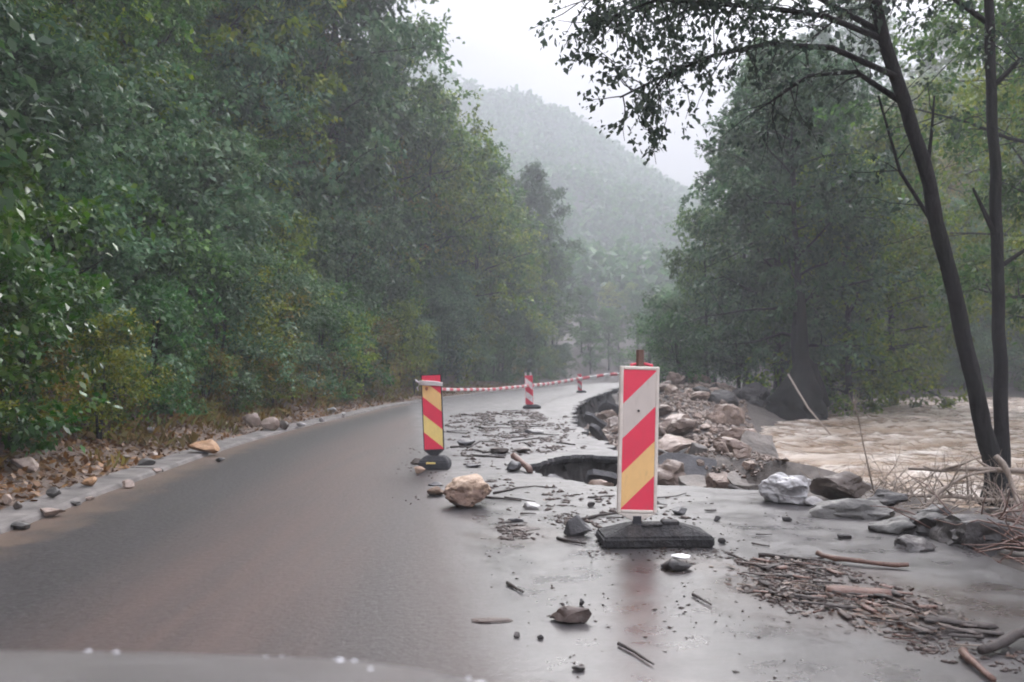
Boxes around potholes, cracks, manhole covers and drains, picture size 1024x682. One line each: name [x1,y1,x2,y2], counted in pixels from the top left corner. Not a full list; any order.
pothole [570,390,617,450]
pothole [529,455,618,484]
